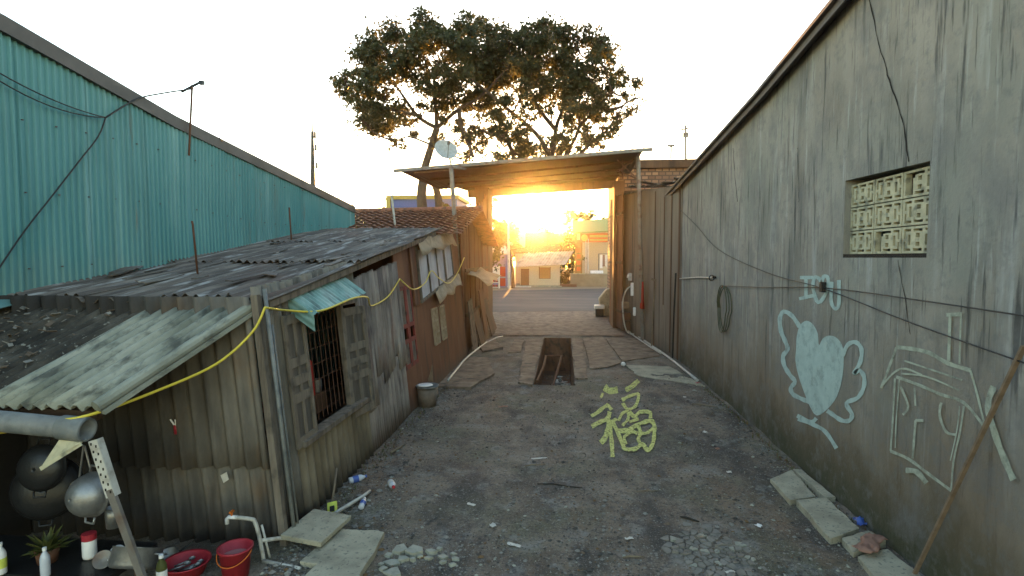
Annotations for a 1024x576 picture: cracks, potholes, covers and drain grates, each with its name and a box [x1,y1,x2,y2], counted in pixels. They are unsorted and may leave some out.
crack [661,521,768,576]
